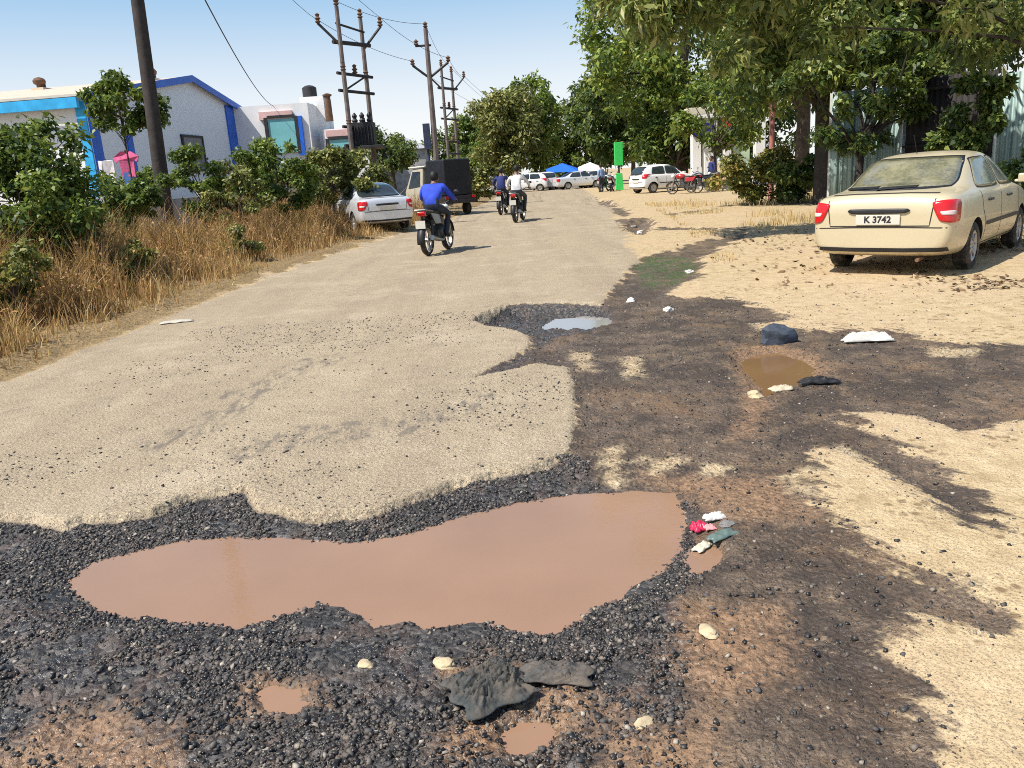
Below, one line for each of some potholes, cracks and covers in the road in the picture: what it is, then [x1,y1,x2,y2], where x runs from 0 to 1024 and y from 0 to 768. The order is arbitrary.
pothole [0,462,708,670]
pothole [727,346,827,396]
pothole [475,306,621,332]
pothole [489,709,569,757]
pothole [247,675,317,715]
